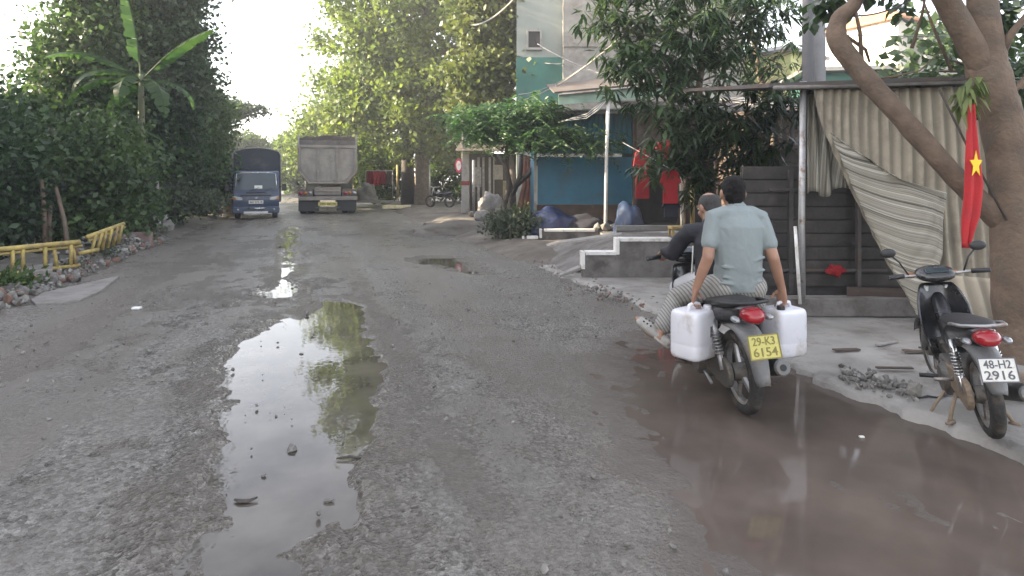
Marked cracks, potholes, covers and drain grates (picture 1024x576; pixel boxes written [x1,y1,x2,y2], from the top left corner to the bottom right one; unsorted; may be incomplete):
pothole [405,255,494,275]
pothole [273,225,304,265]
pothole [240,264,300,299]
pothole [153,298,392,576]
